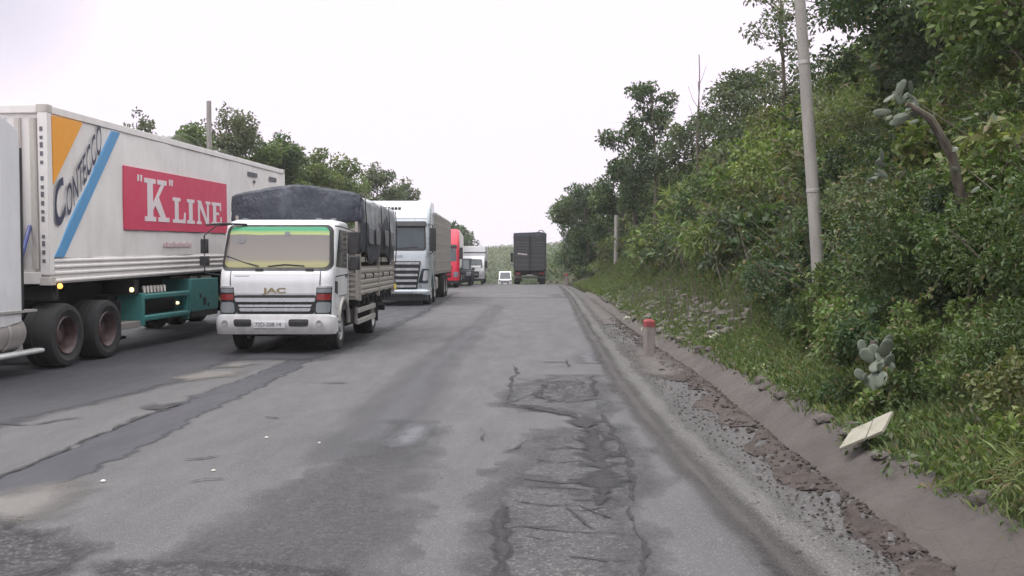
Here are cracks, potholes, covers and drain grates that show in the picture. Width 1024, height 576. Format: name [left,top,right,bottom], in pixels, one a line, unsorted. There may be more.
crack [487,359,650,576]
